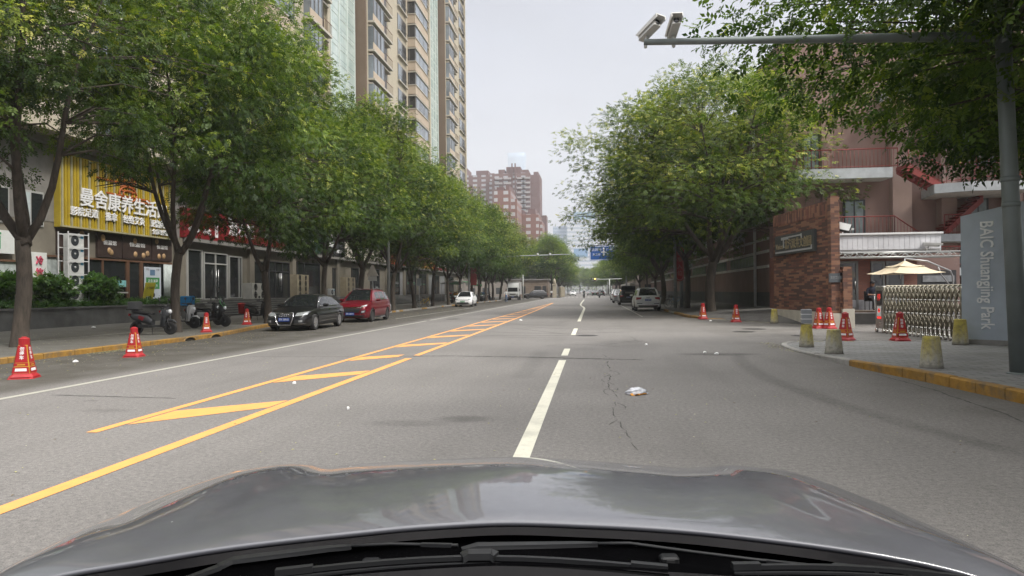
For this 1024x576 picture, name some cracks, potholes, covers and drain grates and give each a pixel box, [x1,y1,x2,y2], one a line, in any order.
crack [320,336,639,450]
